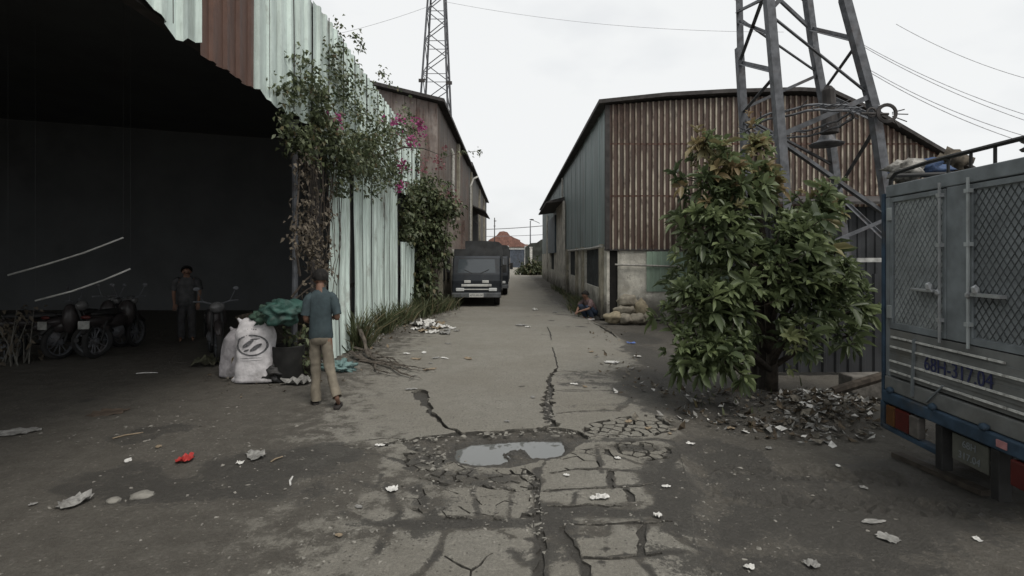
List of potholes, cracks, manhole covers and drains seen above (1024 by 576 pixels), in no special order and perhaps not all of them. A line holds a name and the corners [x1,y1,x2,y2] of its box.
crack [342,327,673,576]
pothole [402,427,591,468]
